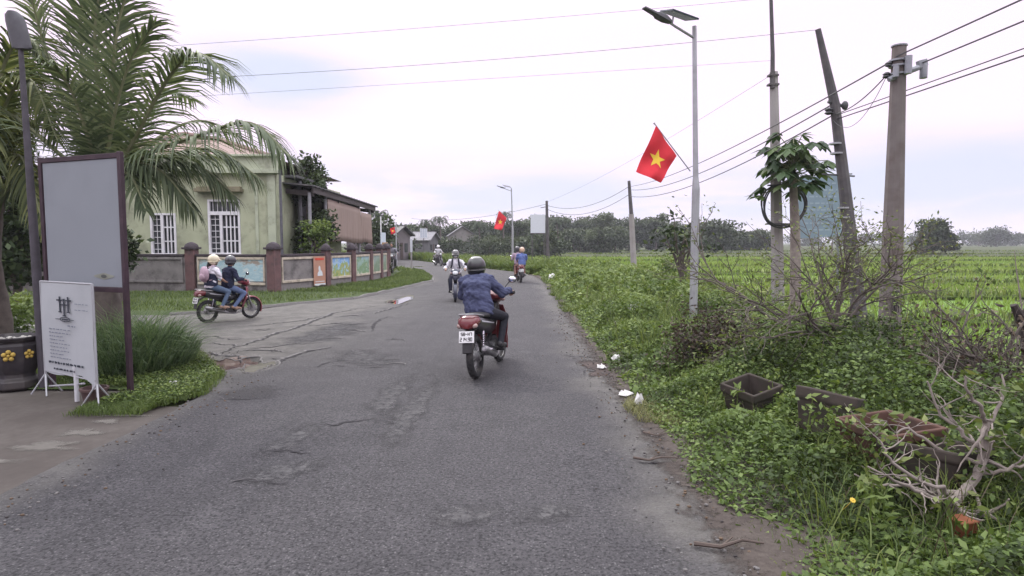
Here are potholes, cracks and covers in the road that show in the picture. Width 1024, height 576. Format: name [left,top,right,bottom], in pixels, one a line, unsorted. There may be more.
pothole [214,356,263,371]
crack [193,303,438,484]
pothole [240,360,281,374]
